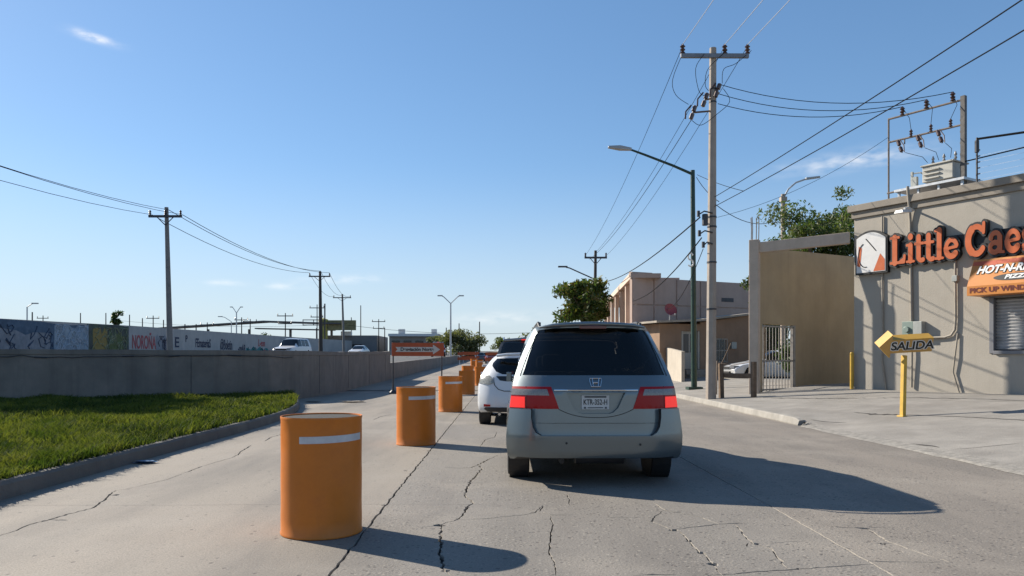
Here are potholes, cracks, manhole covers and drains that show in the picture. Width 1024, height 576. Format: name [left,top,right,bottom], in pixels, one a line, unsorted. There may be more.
crack [632,504,948,576]
crack [422,432,576,576]
crack [0,435,278,536]
